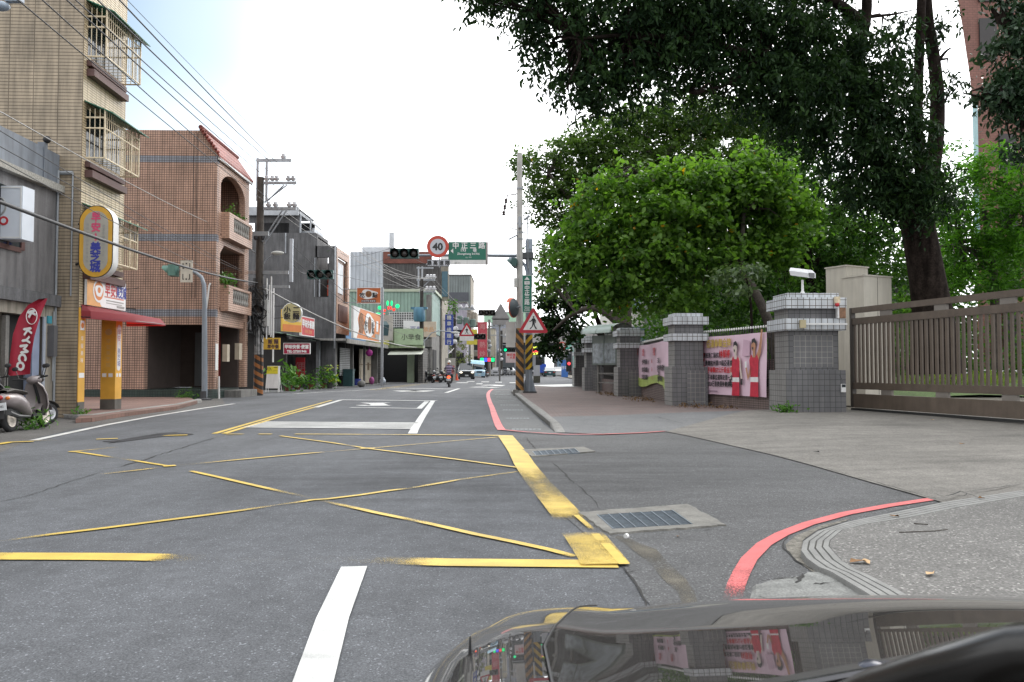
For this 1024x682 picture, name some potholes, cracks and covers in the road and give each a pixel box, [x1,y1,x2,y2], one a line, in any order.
drain grate [578,504,726,535]
drain grate [523,447,595,457]
crack [782,535,810,568]
